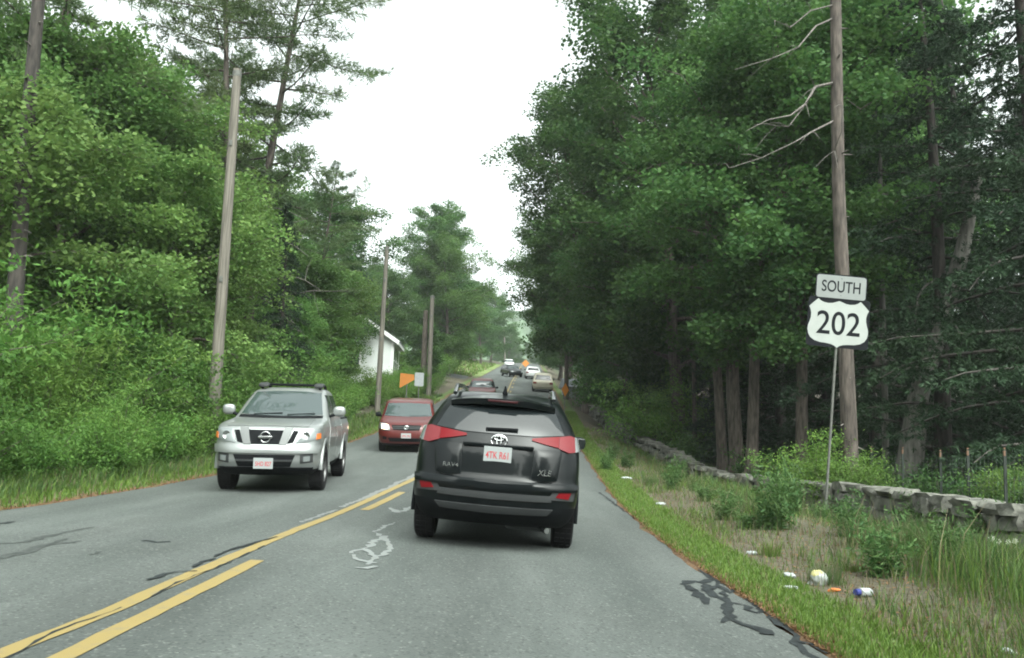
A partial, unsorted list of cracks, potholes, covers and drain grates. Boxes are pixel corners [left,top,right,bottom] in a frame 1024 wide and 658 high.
crack [680,569,828,658]
crack [6,536,278,657]
crack [0,521,102,559]
